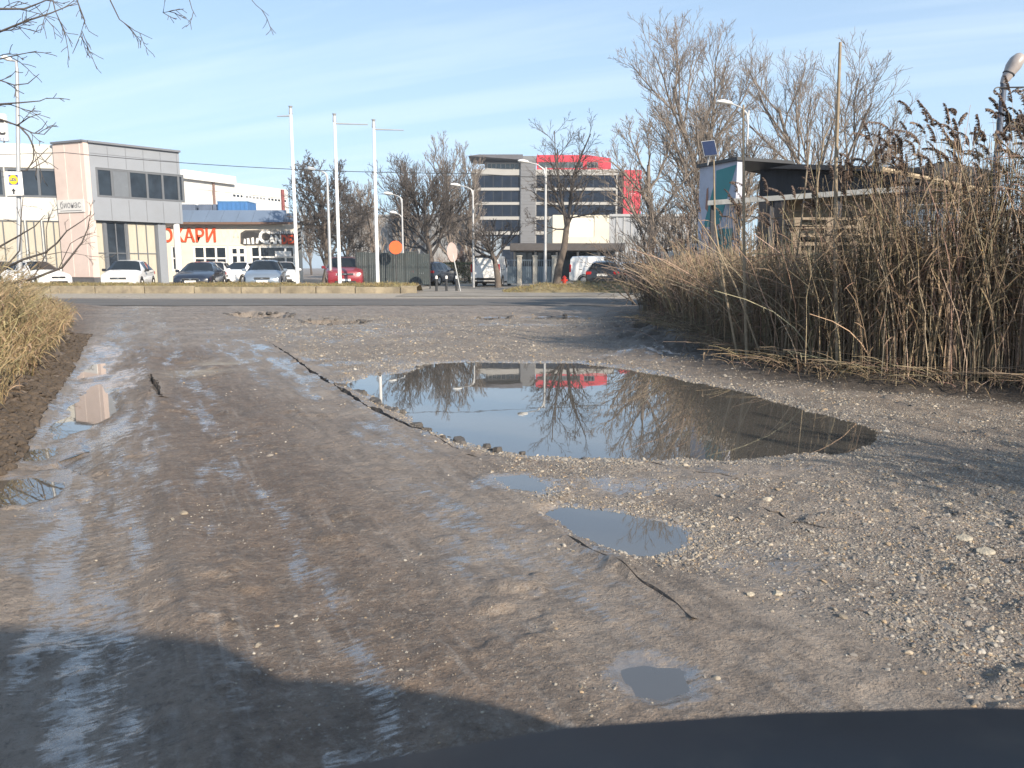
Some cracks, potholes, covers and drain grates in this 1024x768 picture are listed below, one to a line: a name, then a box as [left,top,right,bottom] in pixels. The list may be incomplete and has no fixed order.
crack [560,534,698,621]
pothole [597,647,717,710]
pothole [531,499,705,558]
pothole [484,472,560,497]
pothole [220,310,302,319]
crack [266,341,475,456]
pothole [295,317,374,326]
pothole [331,359,905,466]
